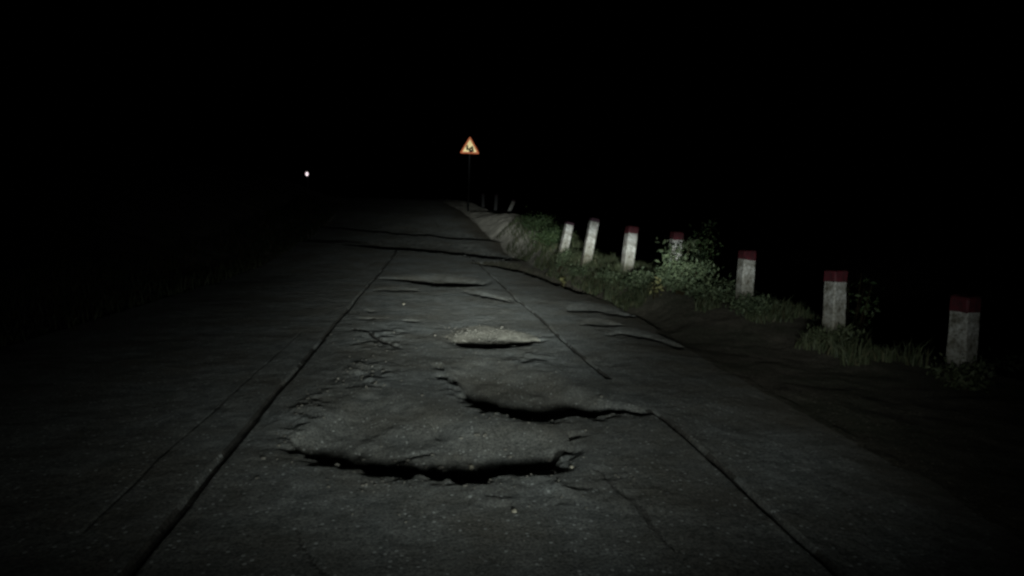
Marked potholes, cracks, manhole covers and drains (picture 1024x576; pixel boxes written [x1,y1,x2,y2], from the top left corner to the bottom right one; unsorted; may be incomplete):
crack [353,328,398,348]
pothole [287,383,575,483]
pothole [439,357,644,422]
